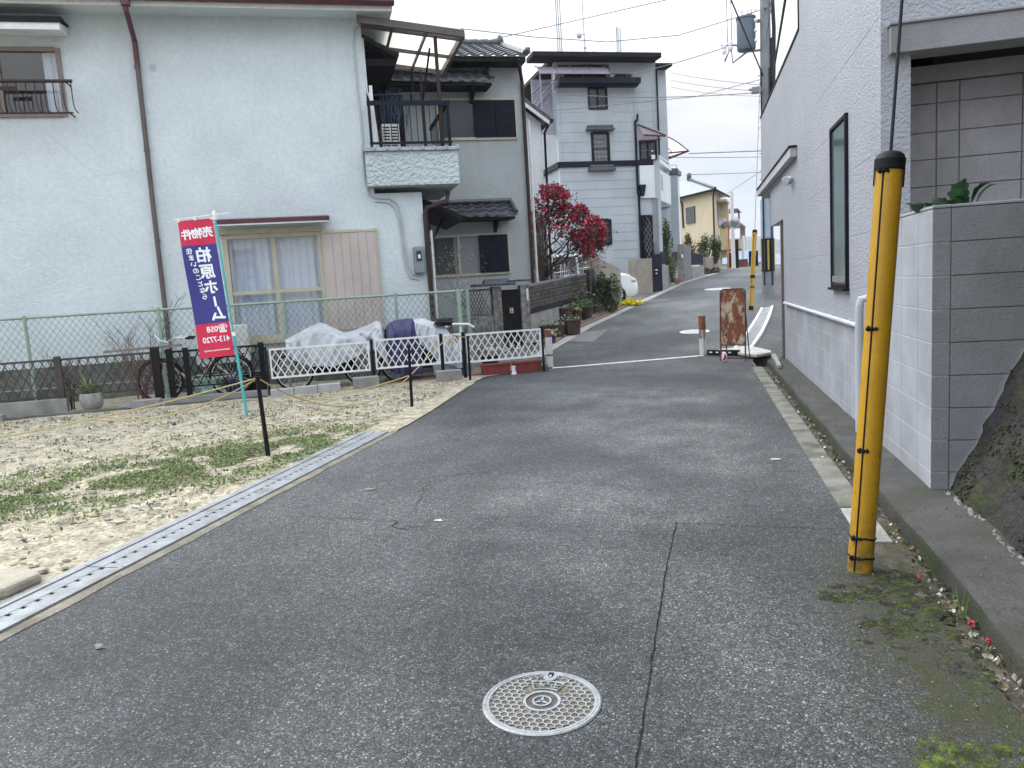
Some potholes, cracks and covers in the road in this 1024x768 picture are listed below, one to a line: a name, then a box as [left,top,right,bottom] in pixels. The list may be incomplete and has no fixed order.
drain grate [0,566,125,633]
drain grate [84,479,296,569]
manhole cover [482,671,602,737]
